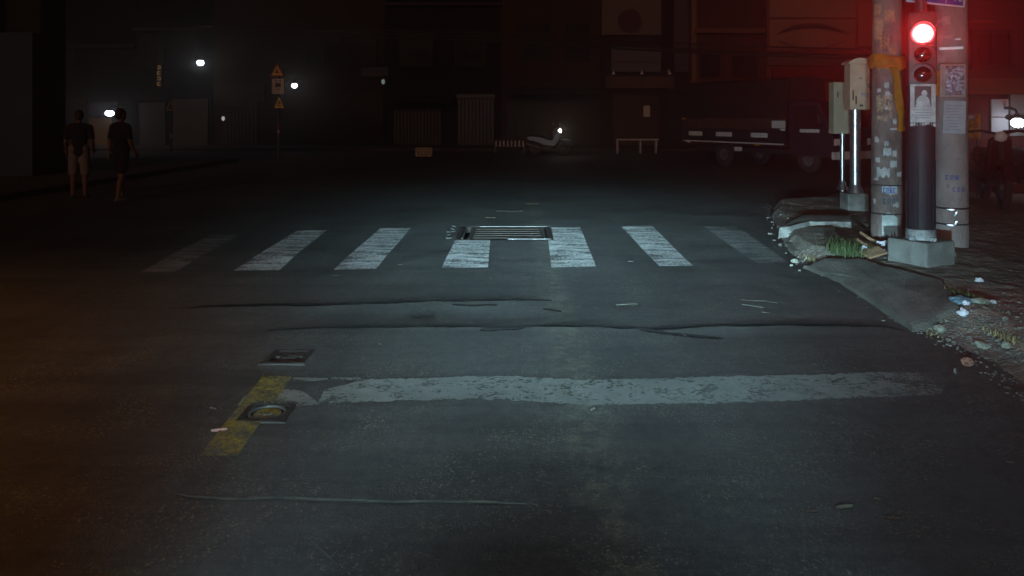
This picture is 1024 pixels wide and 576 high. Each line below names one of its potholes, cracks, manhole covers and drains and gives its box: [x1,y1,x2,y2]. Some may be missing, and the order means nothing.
crack [188,298,907,339]
manhole cover [236,404,296,424]
manhole cover [258,349,315,365]
